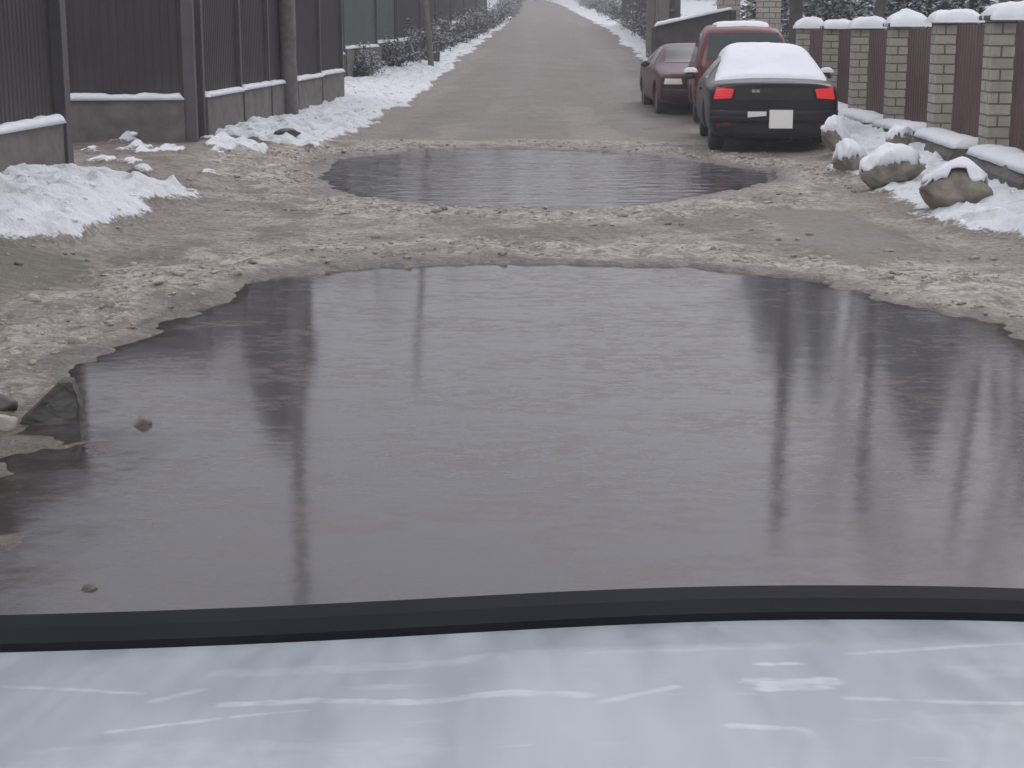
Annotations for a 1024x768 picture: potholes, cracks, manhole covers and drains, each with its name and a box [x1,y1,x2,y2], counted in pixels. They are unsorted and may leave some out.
pothole [309,146,785,208]
pothole [0,255,1024,615]
